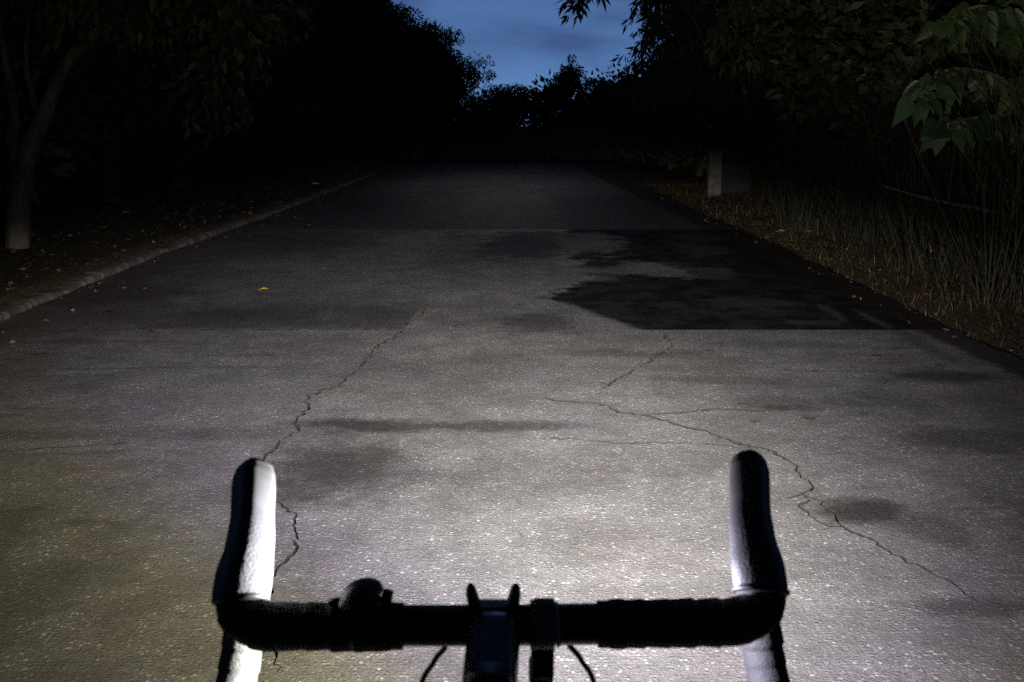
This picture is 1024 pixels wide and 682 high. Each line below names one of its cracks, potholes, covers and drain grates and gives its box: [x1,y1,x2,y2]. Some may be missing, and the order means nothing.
crack [87,303,429,672]
crack [544,332,977,601]
